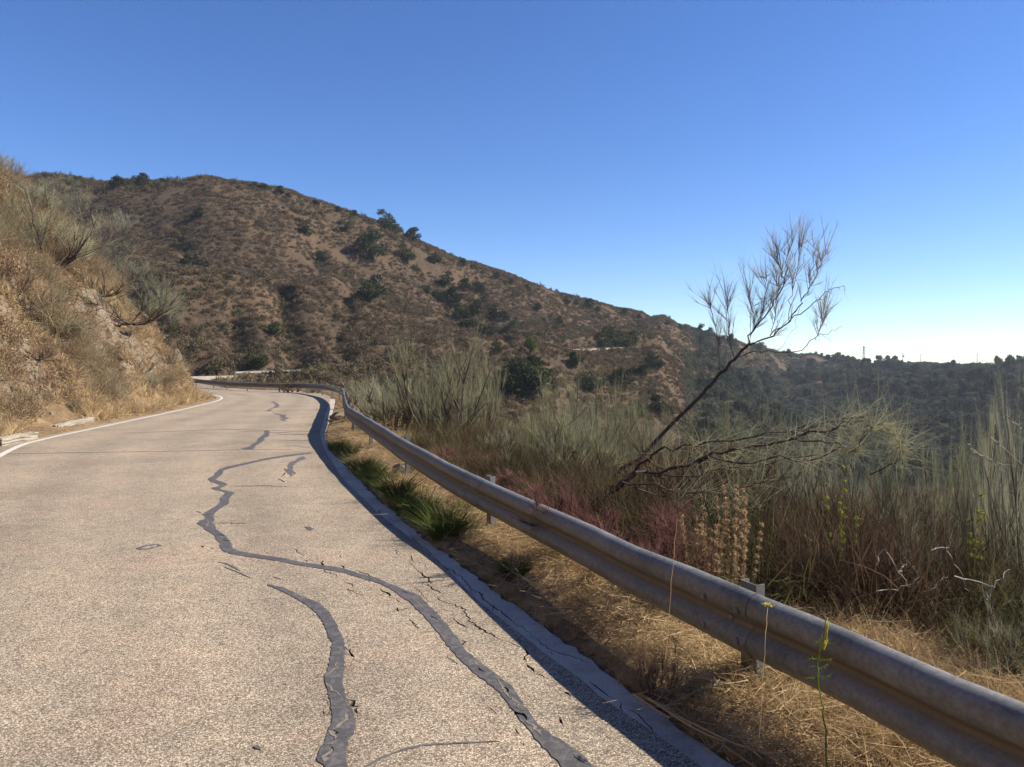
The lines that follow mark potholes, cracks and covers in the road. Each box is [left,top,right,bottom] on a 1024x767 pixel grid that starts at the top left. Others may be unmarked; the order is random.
crack [295,510,658,759]
